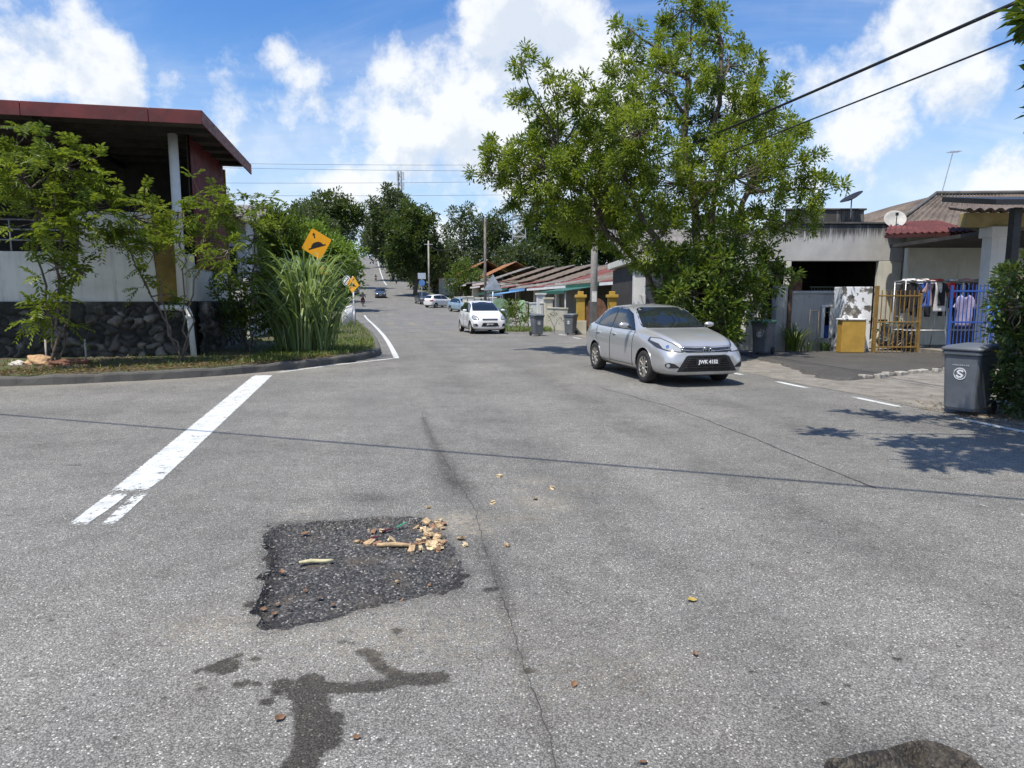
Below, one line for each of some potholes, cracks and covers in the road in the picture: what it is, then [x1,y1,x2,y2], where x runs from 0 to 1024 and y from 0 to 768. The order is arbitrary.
crack [421,411,556,768]
